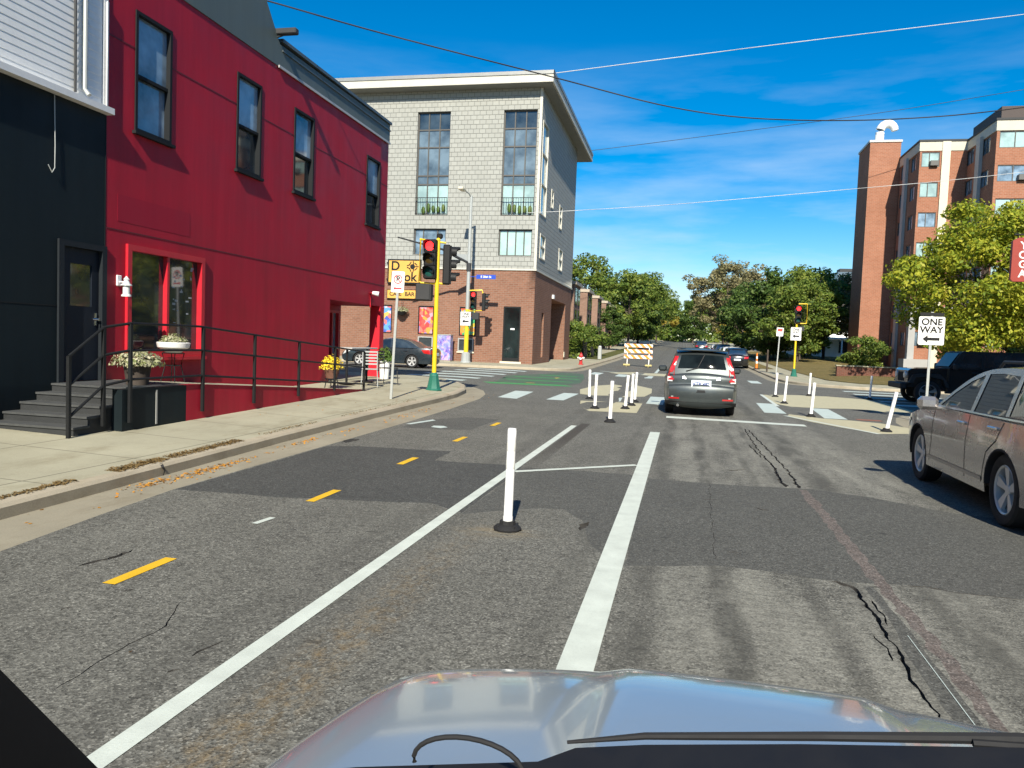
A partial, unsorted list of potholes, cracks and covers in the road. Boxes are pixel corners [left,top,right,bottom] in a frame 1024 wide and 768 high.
crack [728,429,801,488]
crack [53,604,179,691]
crack [831,581,941,718]
